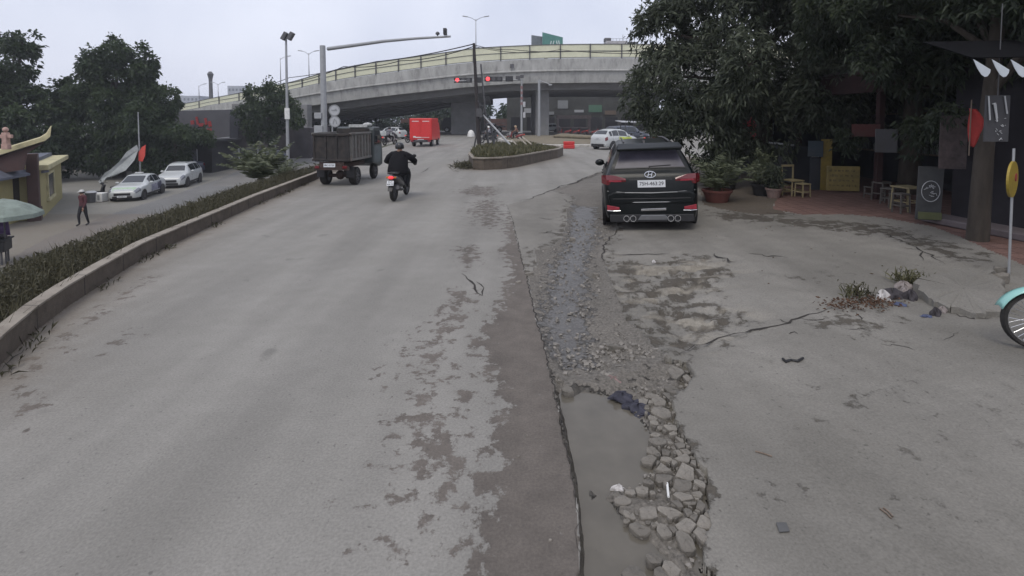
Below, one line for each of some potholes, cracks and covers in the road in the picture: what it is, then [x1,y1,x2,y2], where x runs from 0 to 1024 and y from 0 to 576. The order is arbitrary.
crack [888,230,945,264]
crack [681,308,830,353]
crack [463,274,484,296]
pothole [548,359,716,576]
